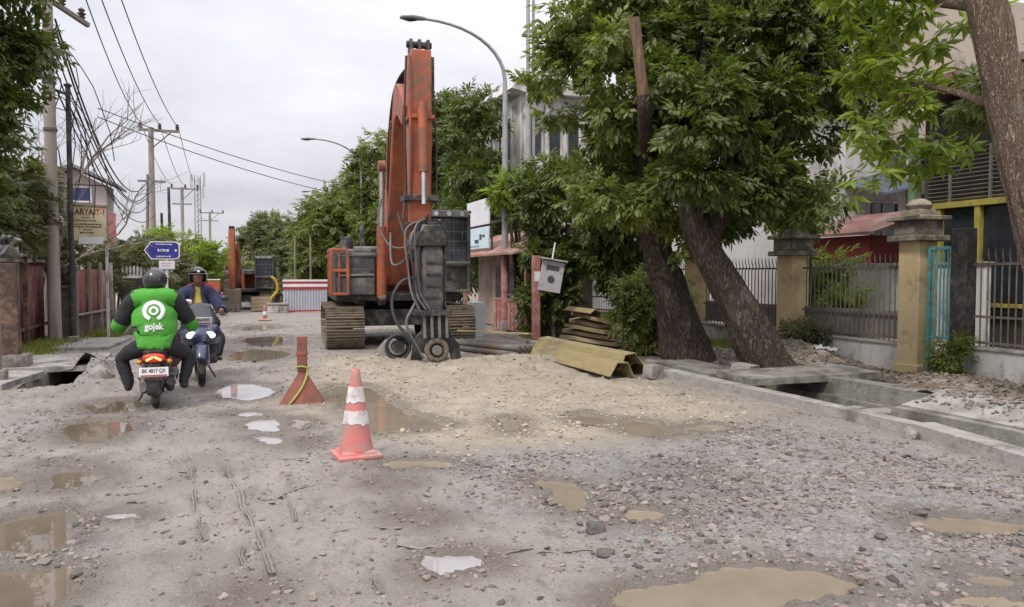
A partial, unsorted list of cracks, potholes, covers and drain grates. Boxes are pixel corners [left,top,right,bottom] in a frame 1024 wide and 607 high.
pothole [30,464,110,492]
pothole [78,395,151,415]
pothole [899,511,1024,536]
pothole [411,546,496,579]
pothole [614,416,691,437]
pothole [233,334,290,347]
pothole [376,457,469,469]
pothole [208,381,280,401]
pothole [318,383,456,434]
pothole [563,411,620,426]
pothole [609,504,684,523]
pothole [0,557,92,607]
